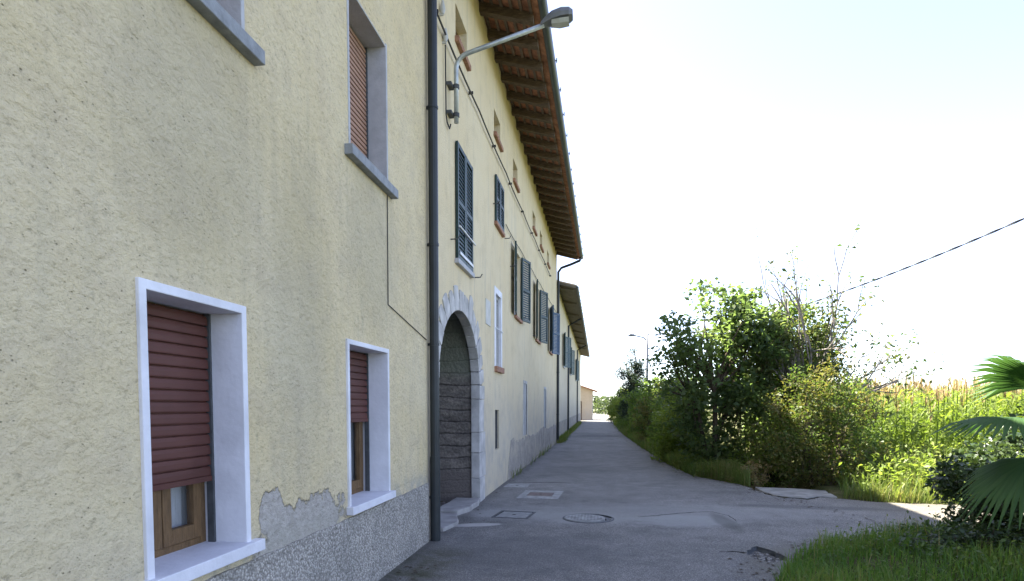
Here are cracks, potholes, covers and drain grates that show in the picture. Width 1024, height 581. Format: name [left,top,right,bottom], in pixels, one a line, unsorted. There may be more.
manhole cover [517,490,564,499]
pothole [747,546,786,562]
manhole cover [563,514,614,523]
manhole cover [492,510,536,519]
